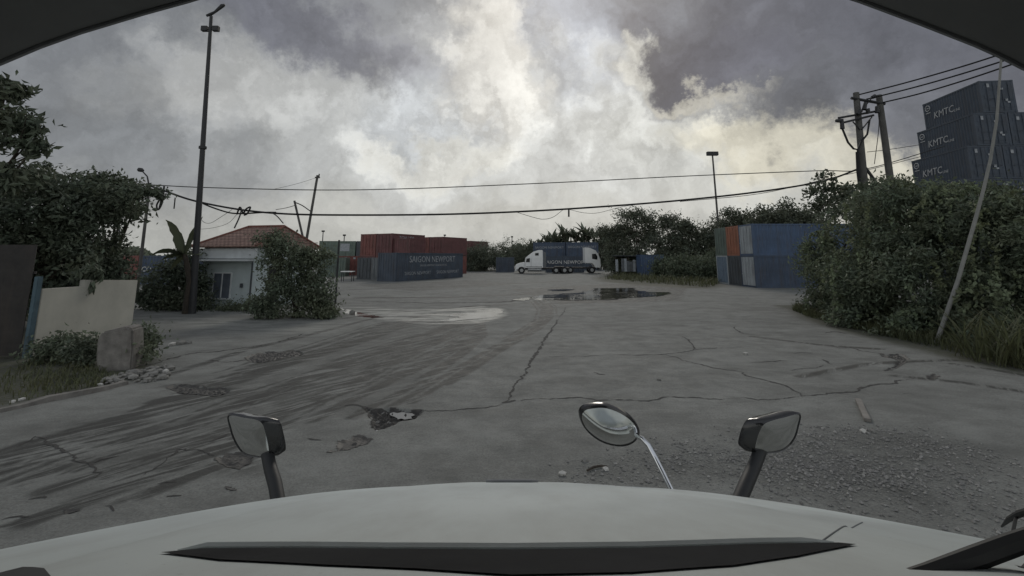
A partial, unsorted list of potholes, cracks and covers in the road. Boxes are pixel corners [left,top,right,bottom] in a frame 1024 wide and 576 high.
pothole [214,452,252,470]
pothole [166,384,229,396]
pothole [879,353,910,371]
crack [502,307,914,403]
crack [18,436,116,477]
pothole [244,350,302,363]
pothole [327,434,373,452]
pothole [362,407,422,430]
